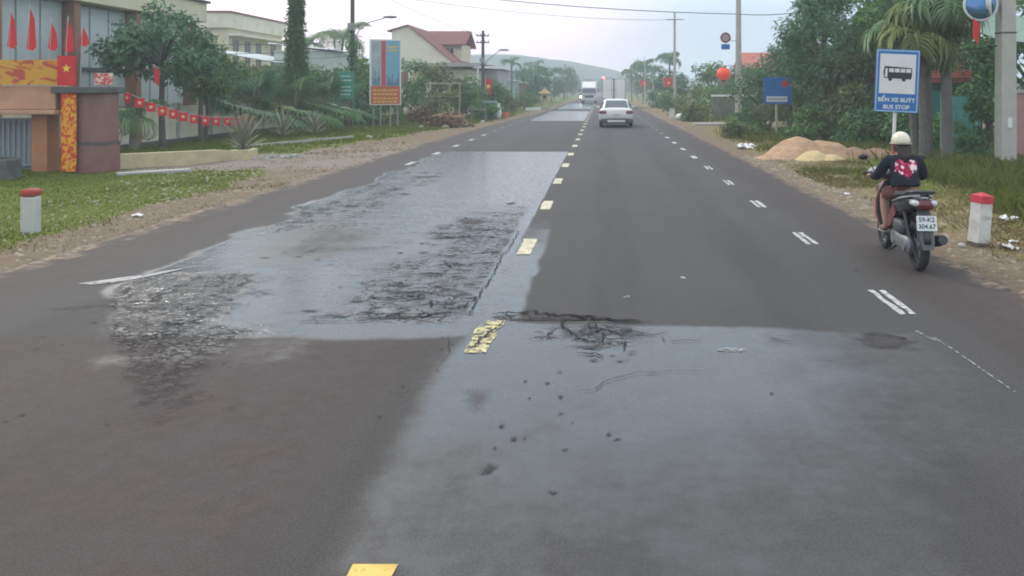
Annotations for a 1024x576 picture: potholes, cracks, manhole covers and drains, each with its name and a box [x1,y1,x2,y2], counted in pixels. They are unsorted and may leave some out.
crack [305,212,697,357]
crack [48,280,273,354]
